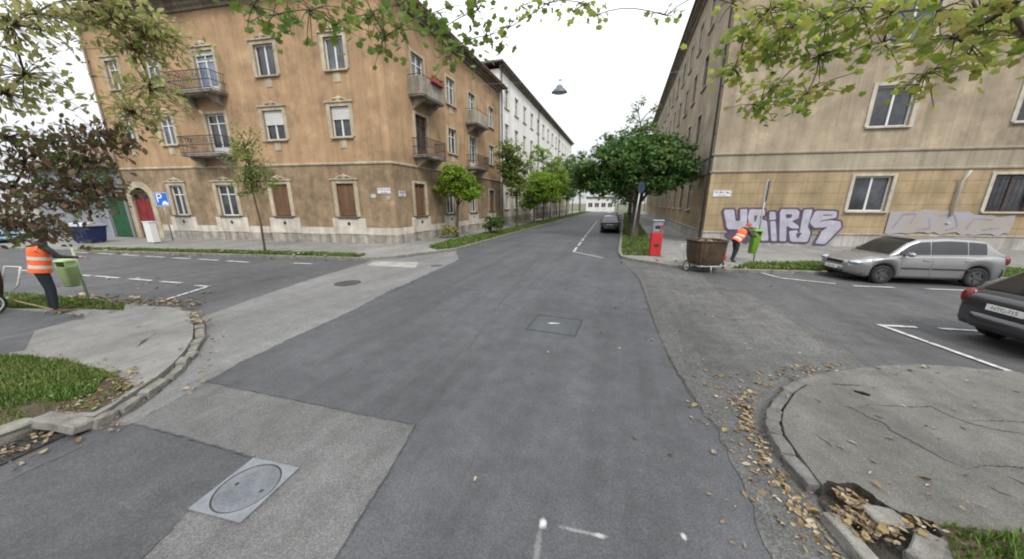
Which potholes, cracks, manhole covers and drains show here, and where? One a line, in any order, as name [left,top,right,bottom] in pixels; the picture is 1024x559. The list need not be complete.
pothole [819,480,943,559]
manhole cover [188,458,299,524]
manhole cover [526,314,583,337]
crack [832,400,1024,496]
